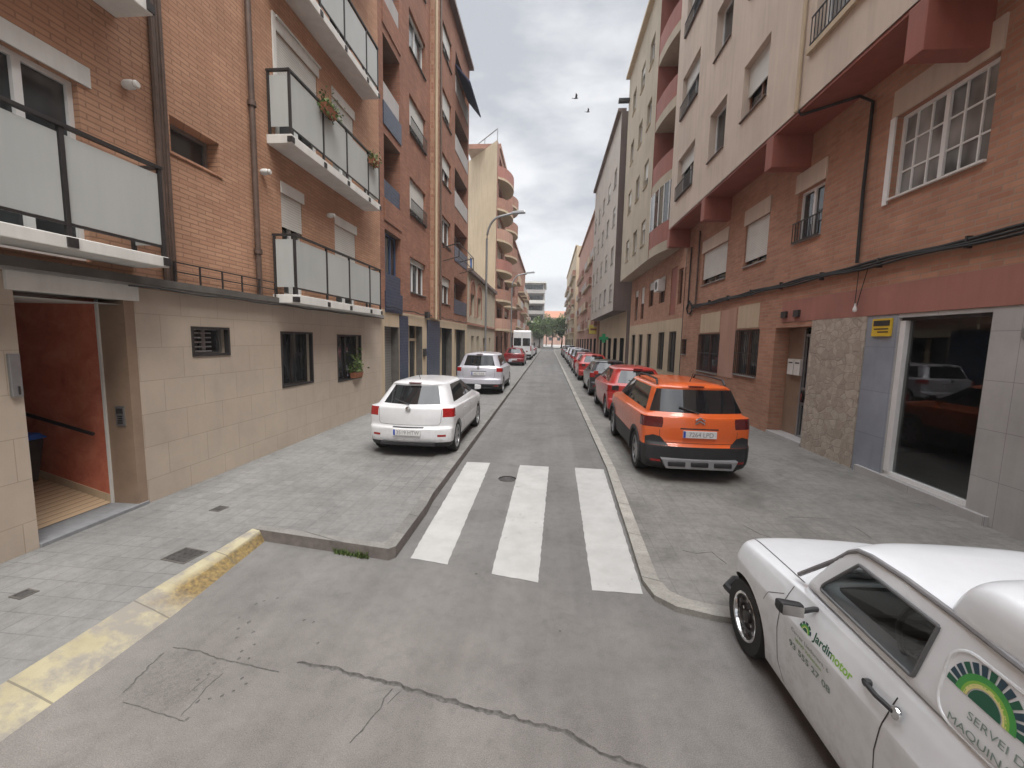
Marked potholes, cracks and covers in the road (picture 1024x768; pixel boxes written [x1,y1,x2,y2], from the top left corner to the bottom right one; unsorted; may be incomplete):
crack [297,661,647,768]
